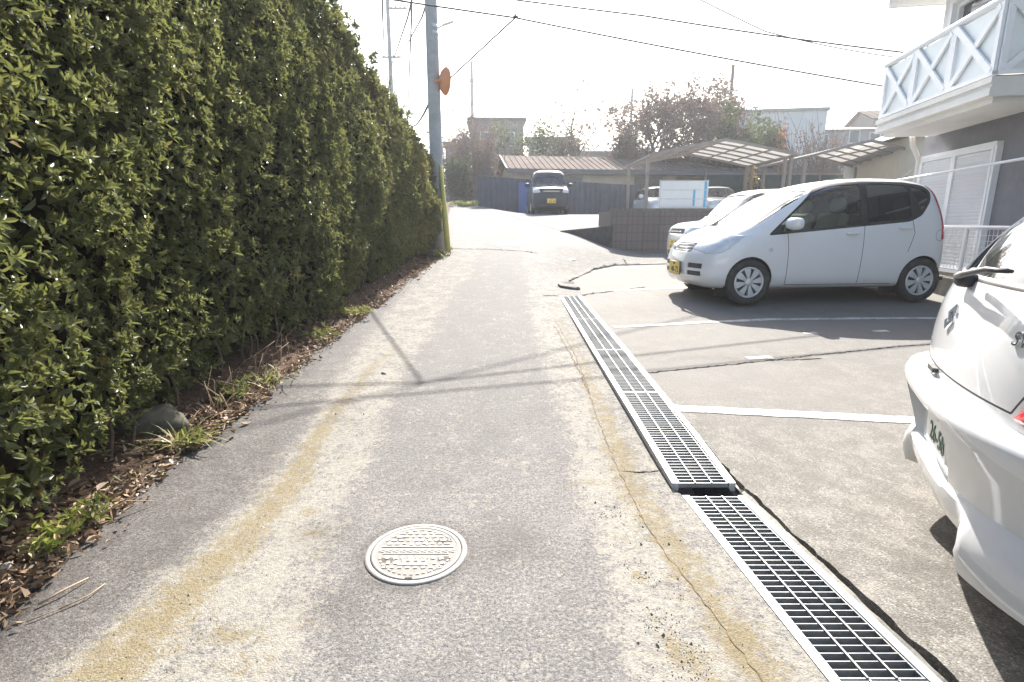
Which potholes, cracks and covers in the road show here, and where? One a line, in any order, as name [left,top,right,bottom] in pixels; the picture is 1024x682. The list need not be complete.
crack [553,321,764,682]
drain grate [563,296,597,319]
drain grate [623,392,728,488]
drain grate [596,349,657,392]
drain grate [690,496,926,681]
manhole cover [364,524,467,586]
drain grate [577,318,623,350]
